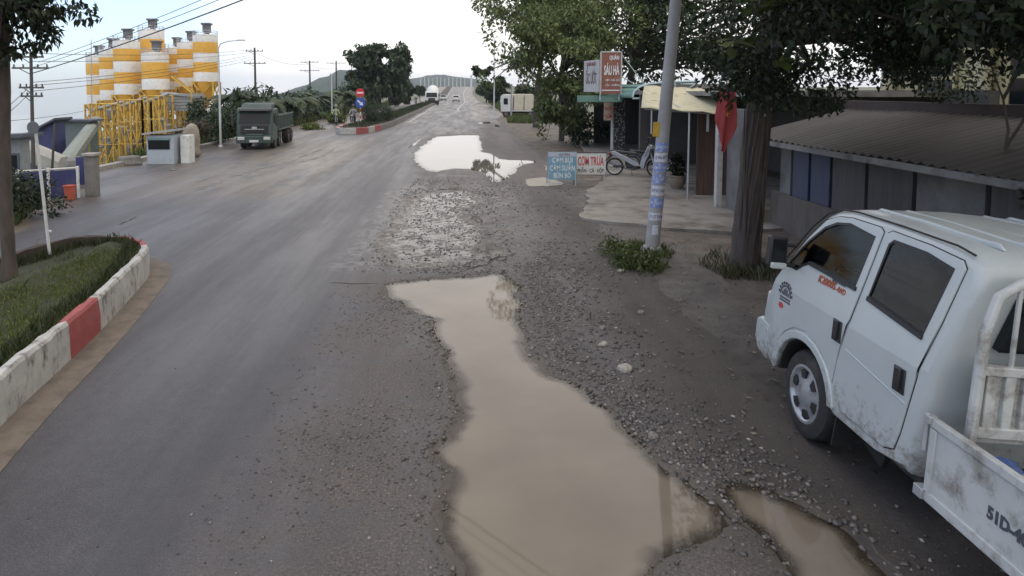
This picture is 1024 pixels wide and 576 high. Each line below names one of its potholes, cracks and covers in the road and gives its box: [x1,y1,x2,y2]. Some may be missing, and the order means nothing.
pothole [374,189,506,269]
pothole [412,135,536,183]
pothole [713,477,903,576]
pothole [379,271,750,576]
crack [461,256,508,270]
